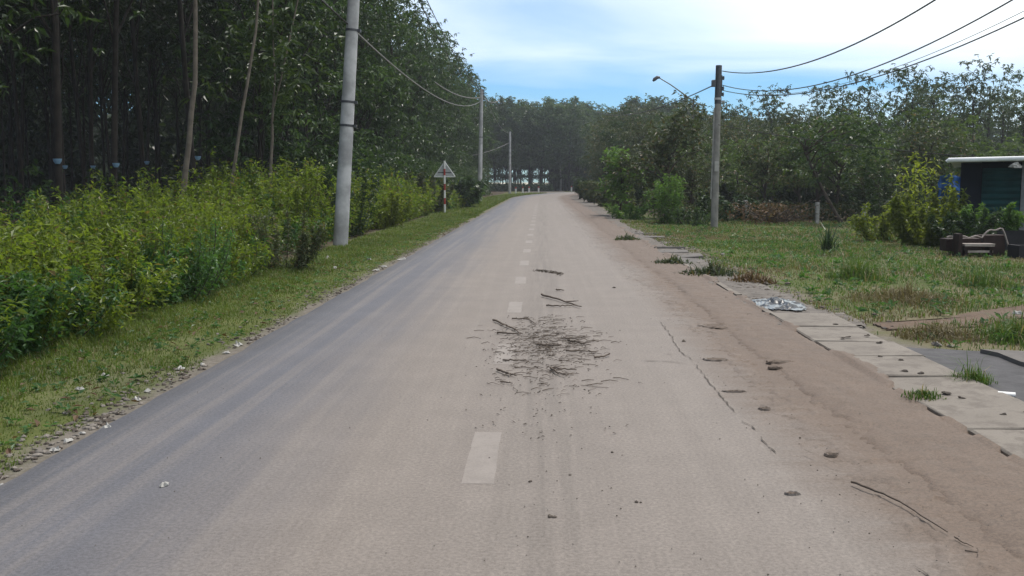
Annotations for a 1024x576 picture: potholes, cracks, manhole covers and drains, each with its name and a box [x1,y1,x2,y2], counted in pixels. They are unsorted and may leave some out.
crack [648,322,775,451]
